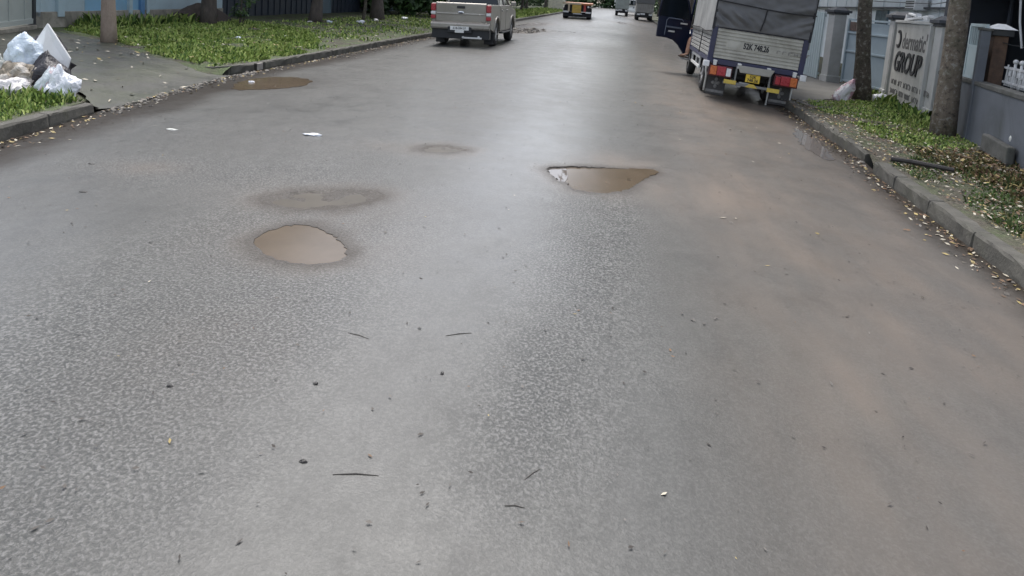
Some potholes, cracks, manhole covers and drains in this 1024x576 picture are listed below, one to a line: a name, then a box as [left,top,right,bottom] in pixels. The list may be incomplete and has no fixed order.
pothole [253,224,347,265]
pothole [547,166,659,193]
